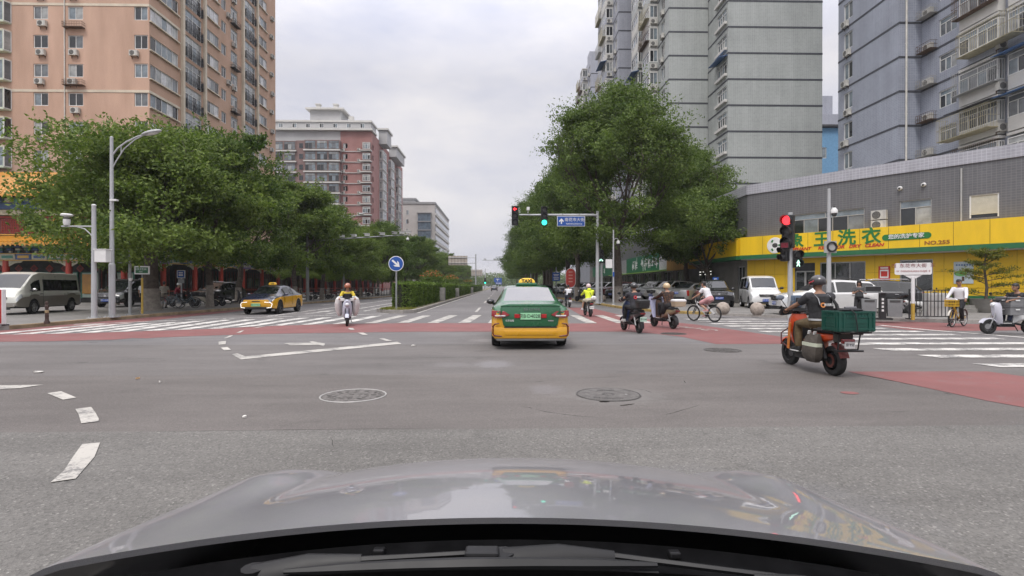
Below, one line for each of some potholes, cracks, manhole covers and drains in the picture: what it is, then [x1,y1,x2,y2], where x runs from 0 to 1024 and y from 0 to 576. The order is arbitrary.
manhole cover [319,389,387,403]
manhole cover [576,388,641,401]
